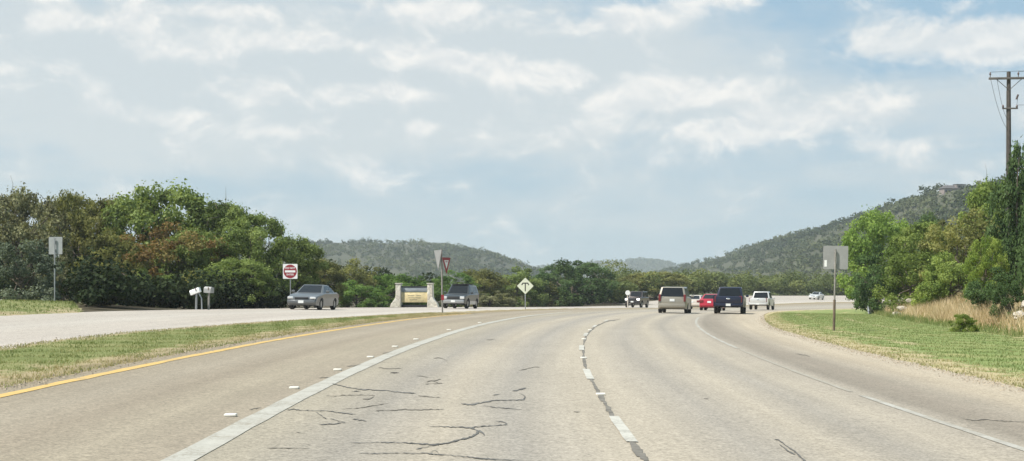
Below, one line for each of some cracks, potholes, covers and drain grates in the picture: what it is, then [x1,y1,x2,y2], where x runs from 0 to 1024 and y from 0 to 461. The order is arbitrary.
crack [287,375,440,425]
